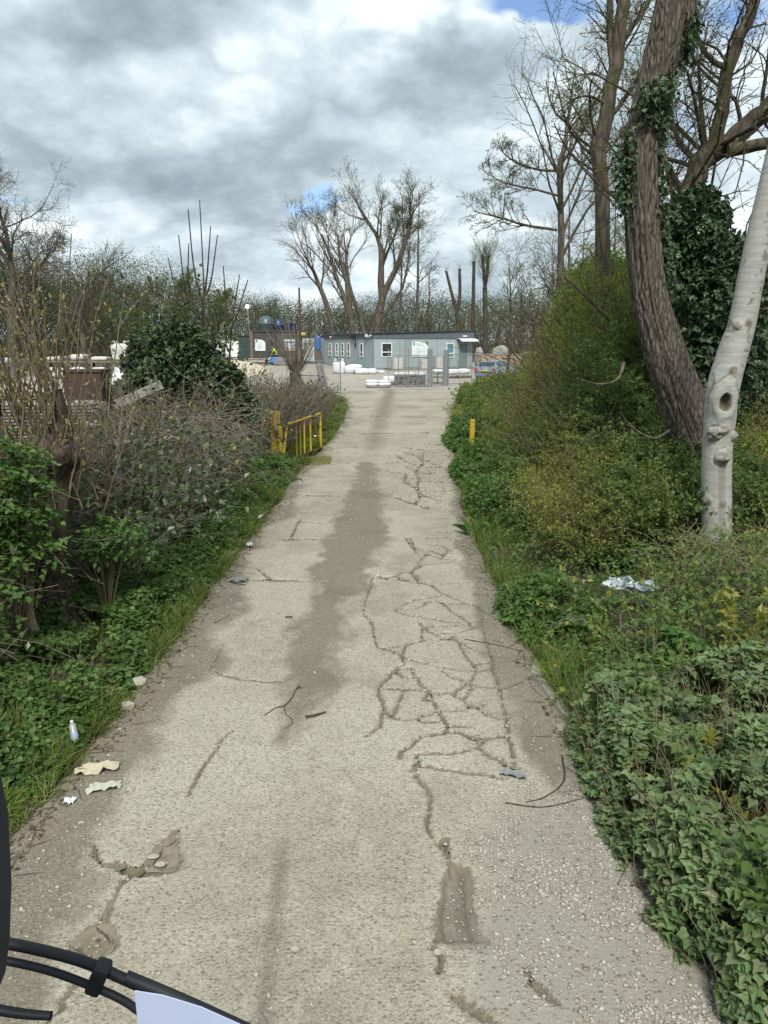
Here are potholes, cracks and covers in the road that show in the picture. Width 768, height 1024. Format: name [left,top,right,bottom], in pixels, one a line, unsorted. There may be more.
crack [363,518,520,847]
crack [522,967,561,1006]
pothole [143,836,182,873]
pothole [69,921,121,960]
pothole [435,837,490,945]
